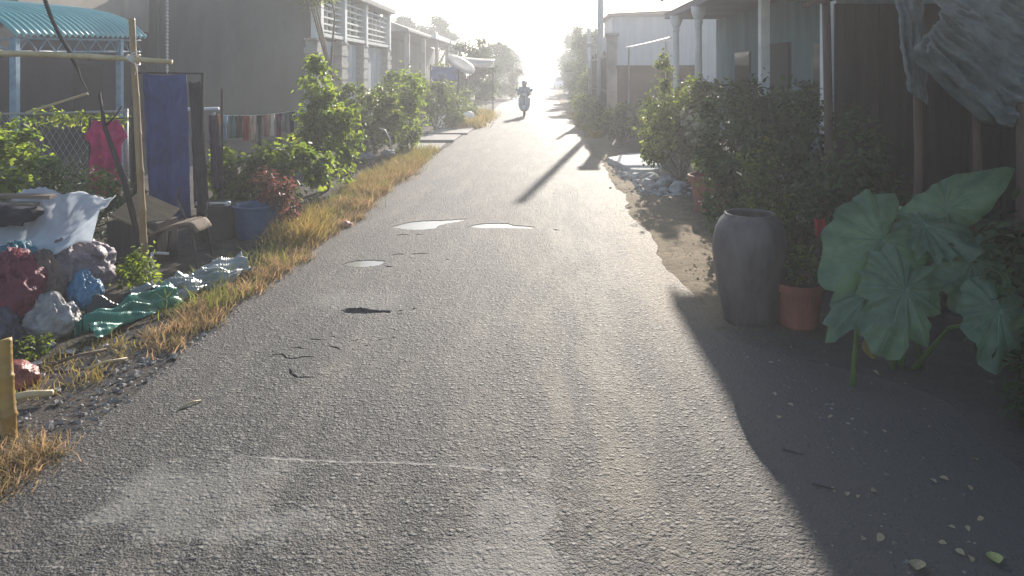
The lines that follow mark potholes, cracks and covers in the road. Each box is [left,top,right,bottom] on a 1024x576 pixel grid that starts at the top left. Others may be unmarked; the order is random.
pothole [392,219,465,230]
crack [268,336,395,378]
